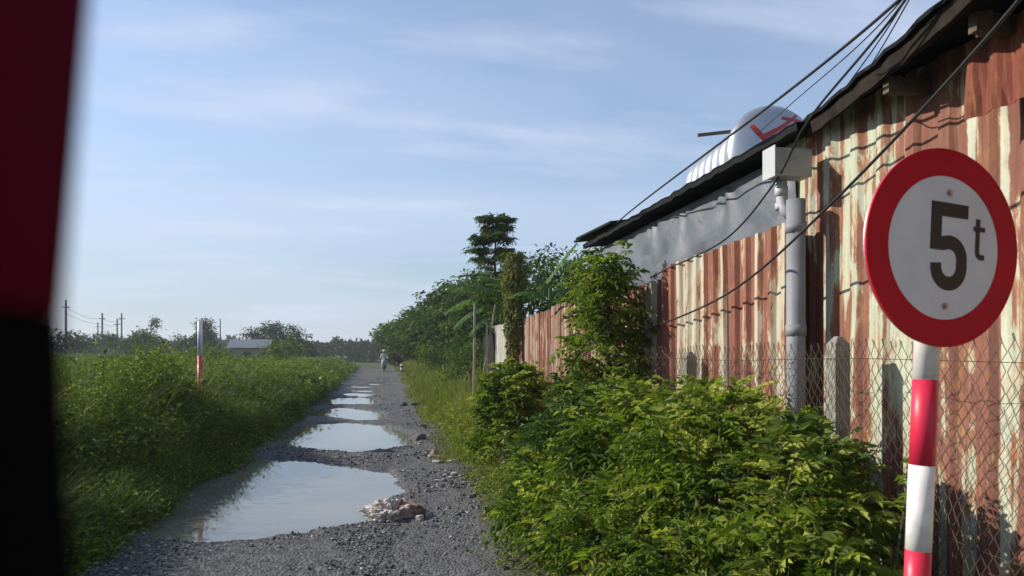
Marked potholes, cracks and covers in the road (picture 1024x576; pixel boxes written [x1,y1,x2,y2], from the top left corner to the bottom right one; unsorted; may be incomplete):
pothole [318,396,383,404]
pothole [305,406,394,422]
pothole [124,454,421,547]
pothole [267,419,423,452]
